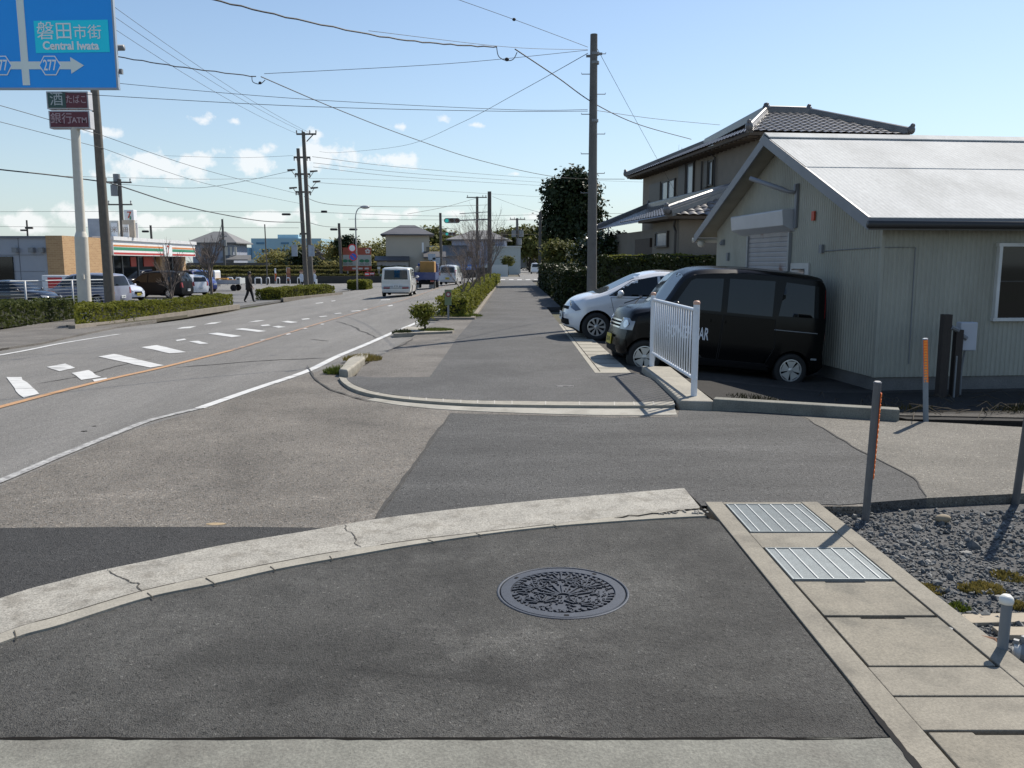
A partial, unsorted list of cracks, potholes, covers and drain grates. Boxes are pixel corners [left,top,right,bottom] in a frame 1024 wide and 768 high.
drain grate [726,504,835,533]
drain grate [765,548,892,583]
manhole cover [497,567,630,620]
